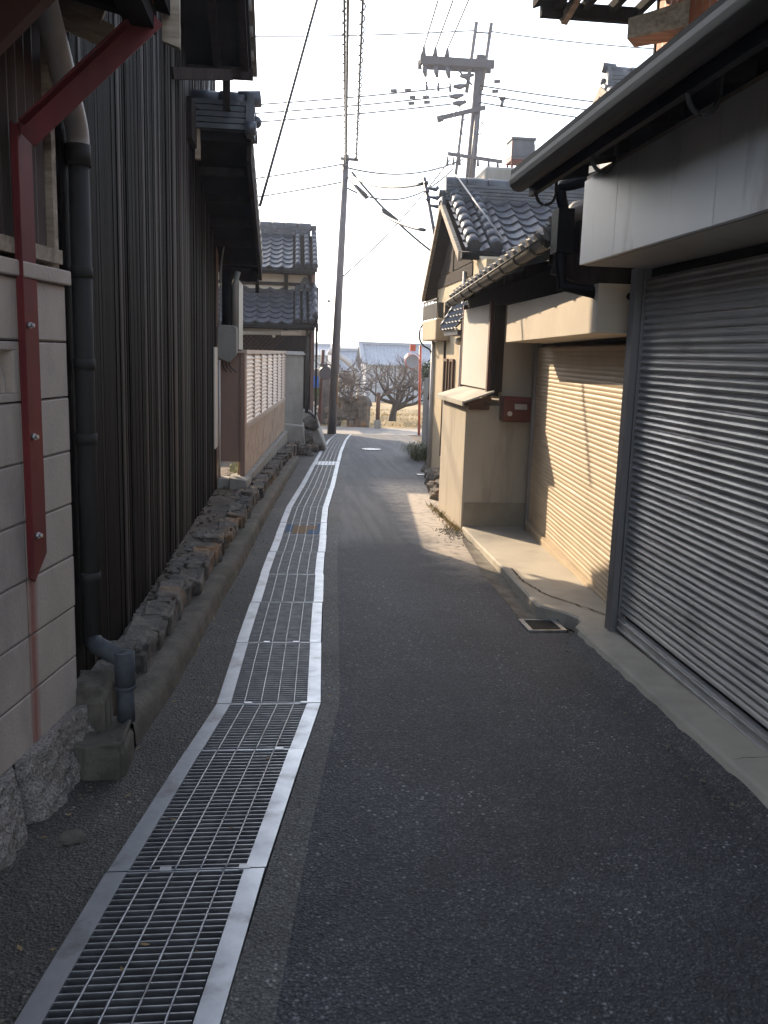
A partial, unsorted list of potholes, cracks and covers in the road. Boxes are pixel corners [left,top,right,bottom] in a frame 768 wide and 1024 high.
drain grate [251,574,324,604]
drain grate [287,497,331,508]
drain grate [293,488,334,497]
drain grate [260,552,325,575]
crack [511,568,604,614]
drain grate [236,602,322,643]
drain grate [14,868,265,1024]
drain grate [107,748,305,873]
drain grate [281,506,328,523]
drain grate [217,642,321,704]
drain grate [187,703,321,751]
drain grate [276,522,327,535]
